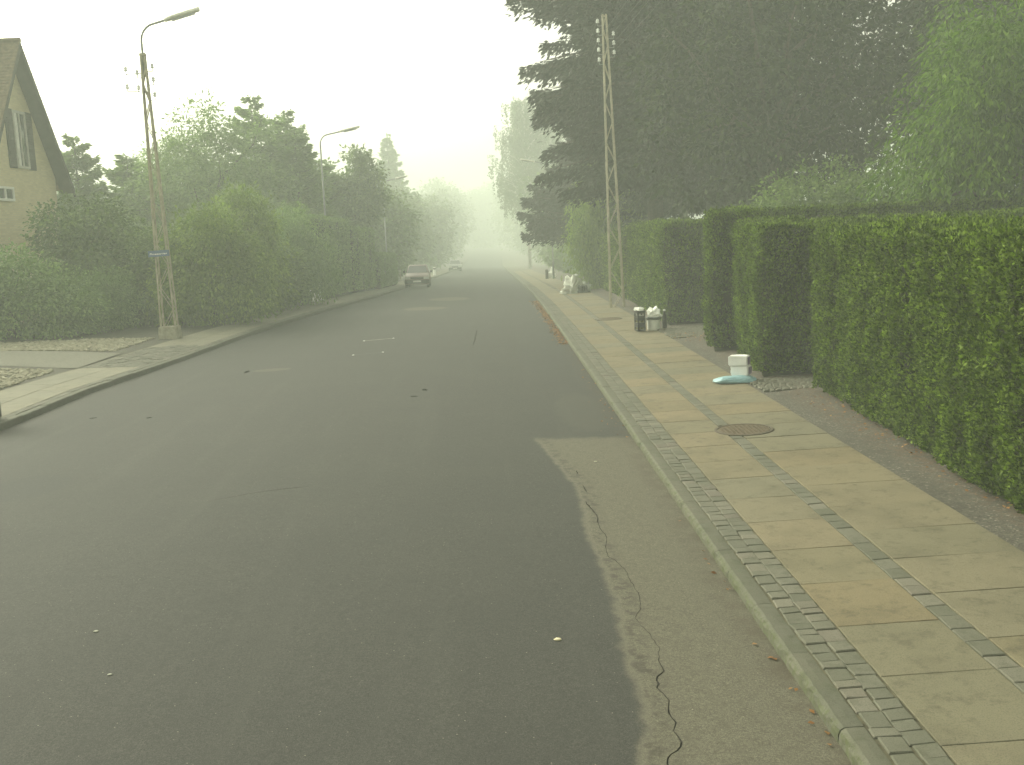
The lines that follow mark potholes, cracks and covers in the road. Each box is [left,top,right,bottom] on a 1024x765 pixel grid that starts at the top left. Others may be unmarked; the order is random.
manhole cover [714,423,774,437]
crack [576,471,683,765]
